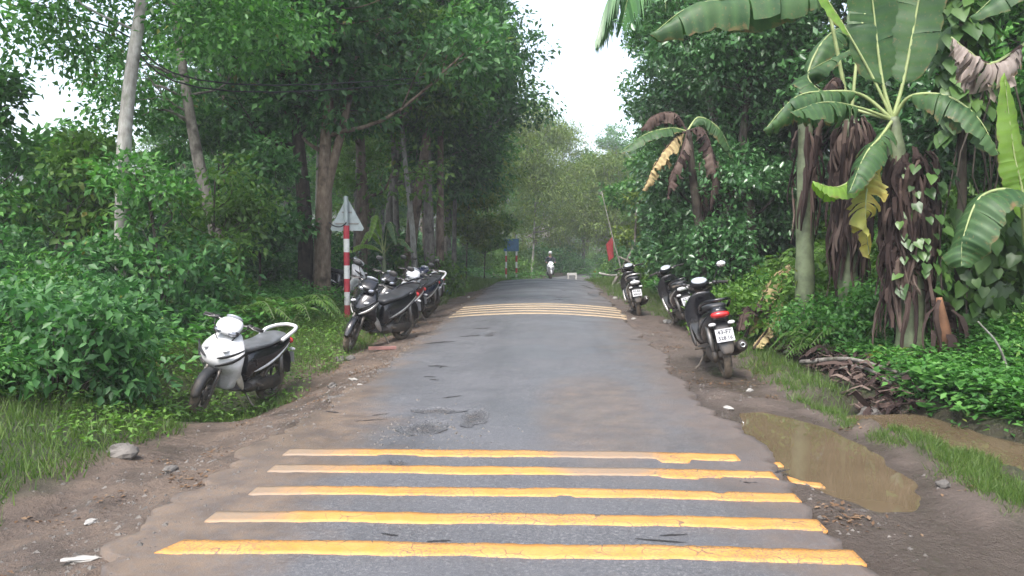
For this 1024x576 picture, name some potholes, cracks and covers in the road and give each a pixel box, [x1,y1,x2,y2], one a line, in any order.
pothole [460,407,489,428]
pothole [395,419,448,436]
crack [635,534,684,542]
